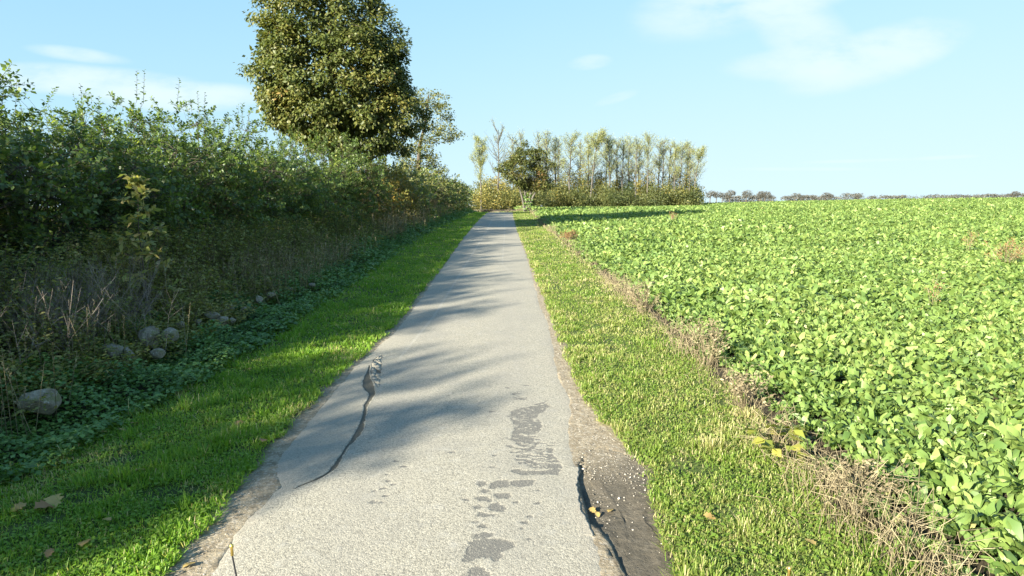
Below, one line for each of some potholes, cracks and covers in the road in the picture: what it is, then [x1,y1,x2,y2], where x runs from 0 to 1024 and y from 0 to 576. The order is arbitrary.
crack [294,355,384,489]
